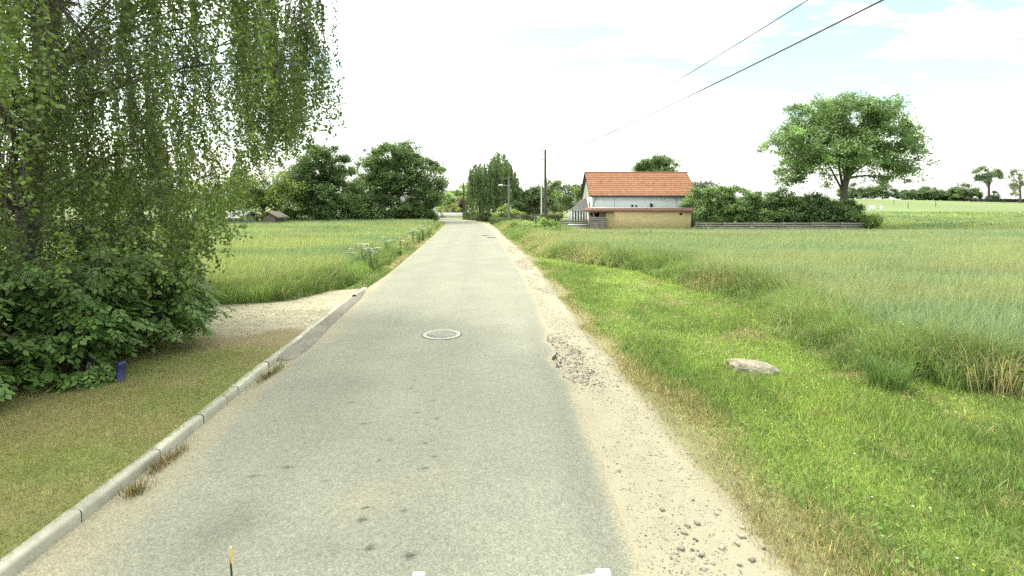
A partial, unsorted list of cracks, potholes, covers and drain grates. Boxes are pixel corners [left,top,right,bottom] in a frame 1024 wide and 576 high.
pothole [548,333,622,388]
manhole cover [421,329,462,340]
